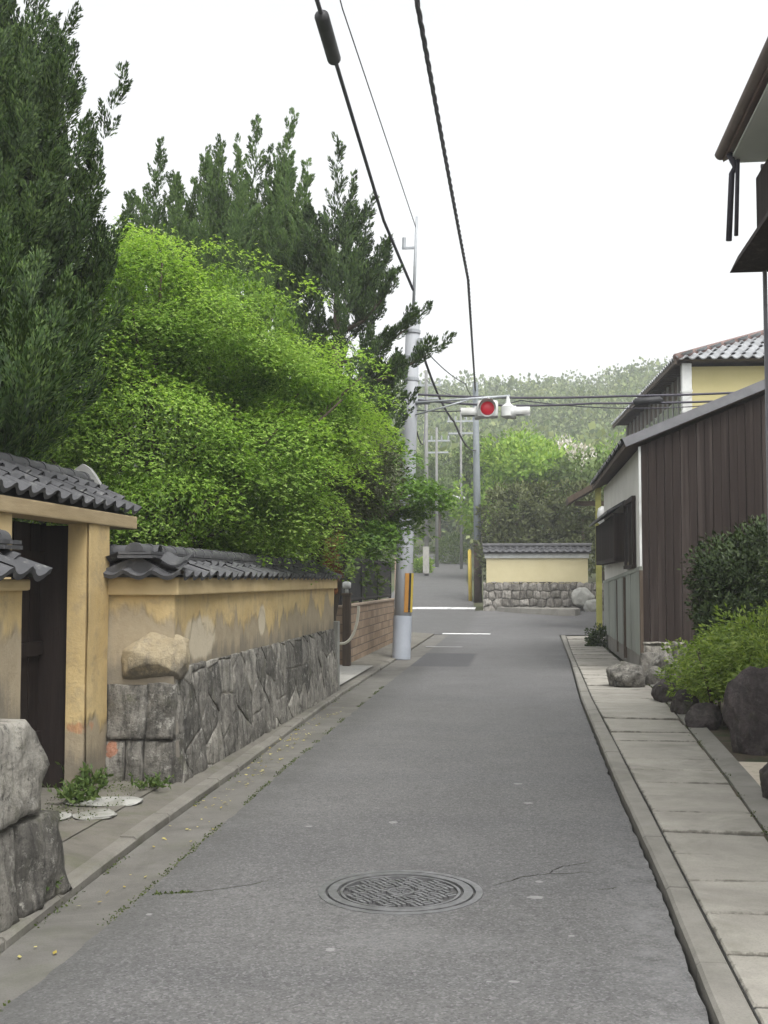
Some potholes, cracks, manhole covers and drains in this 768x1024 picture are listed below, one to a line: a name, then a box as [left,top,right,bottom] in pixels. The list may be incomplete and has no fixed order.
manhole cover [318,870,483,915]
